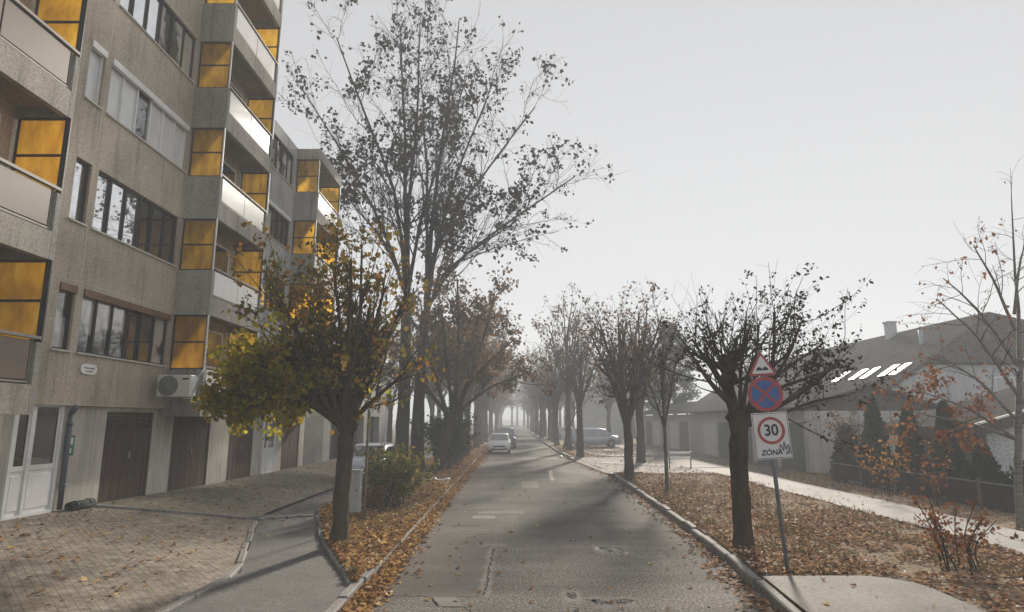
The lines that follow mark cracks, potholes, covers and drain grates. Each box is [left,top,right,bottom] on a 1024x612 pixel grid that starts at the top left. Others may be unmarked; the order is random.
pothole [594,546,629,555]
